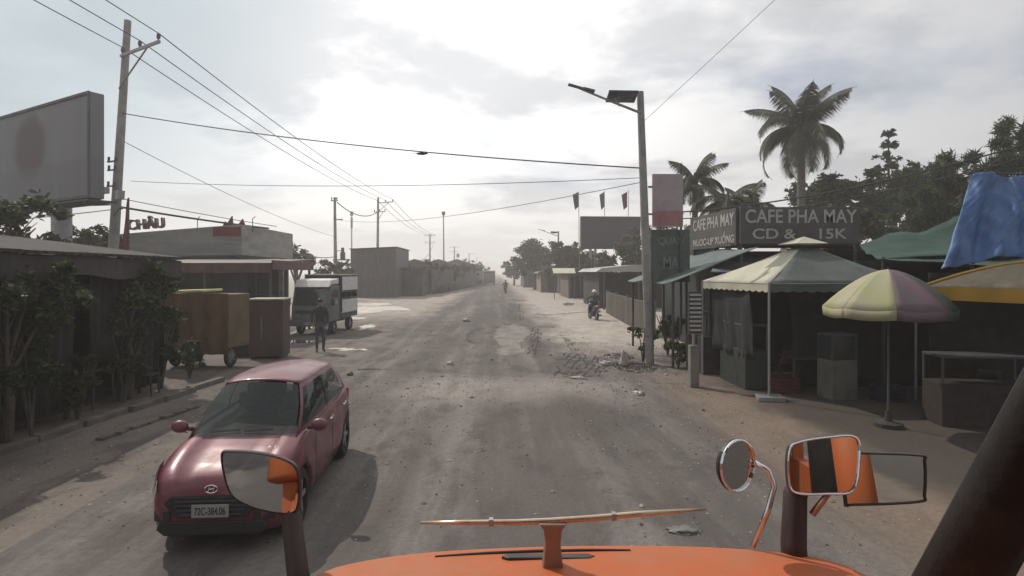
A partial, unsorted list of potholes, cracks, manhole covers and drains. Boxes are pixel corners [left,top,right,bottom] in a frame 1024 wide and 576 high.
crack [507,303,608,377]
